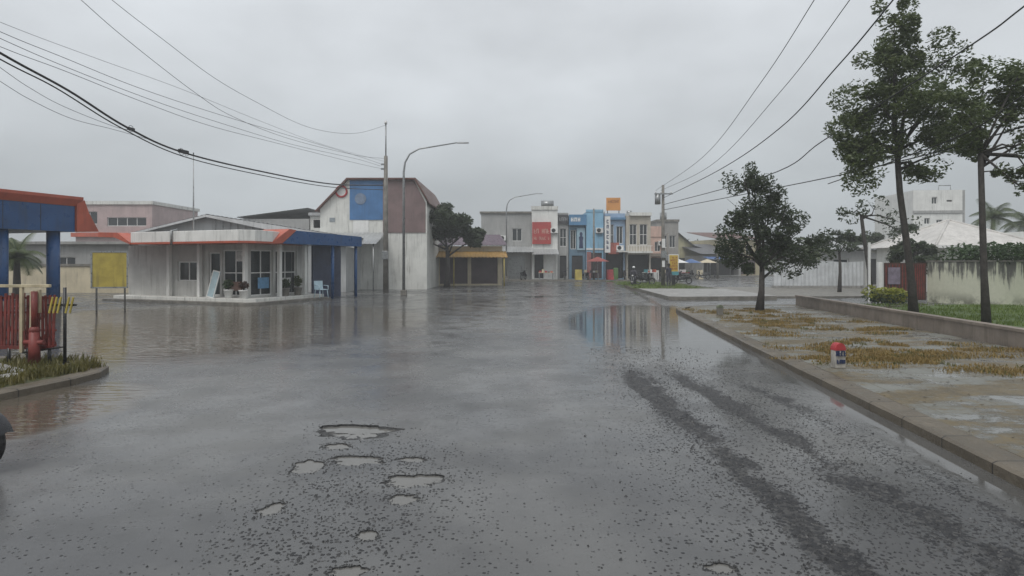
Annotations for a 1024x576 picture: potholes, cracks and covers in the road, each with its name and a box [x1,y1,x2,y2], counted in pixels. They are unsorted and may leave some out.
pothole [304,421,421,443]
pothole [695,560,746,575]
pothole [351,528,385,542]
pothole [319,442,353,451]
pothole [382,490,424,508]
pothole [250,499,291,519]
pothole [390,456,432,464]
pothole [325,453,398,468]
pothole [323,561,377,576]
pothole [365,471,455,491]
pothole [285,457,330,476]
